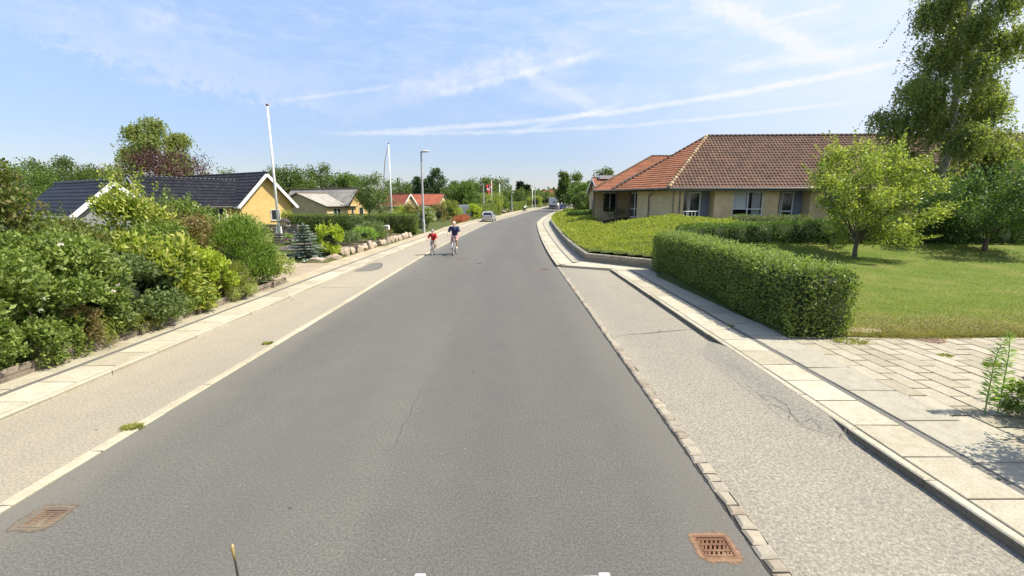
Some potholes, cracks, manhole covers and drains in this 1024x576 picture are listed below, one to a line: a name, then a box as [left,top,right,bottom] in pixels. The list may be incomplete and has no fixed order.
crack [748,385,853,437]
drain grate [18,508,72,527]
drain grate [692,535,740,559]
